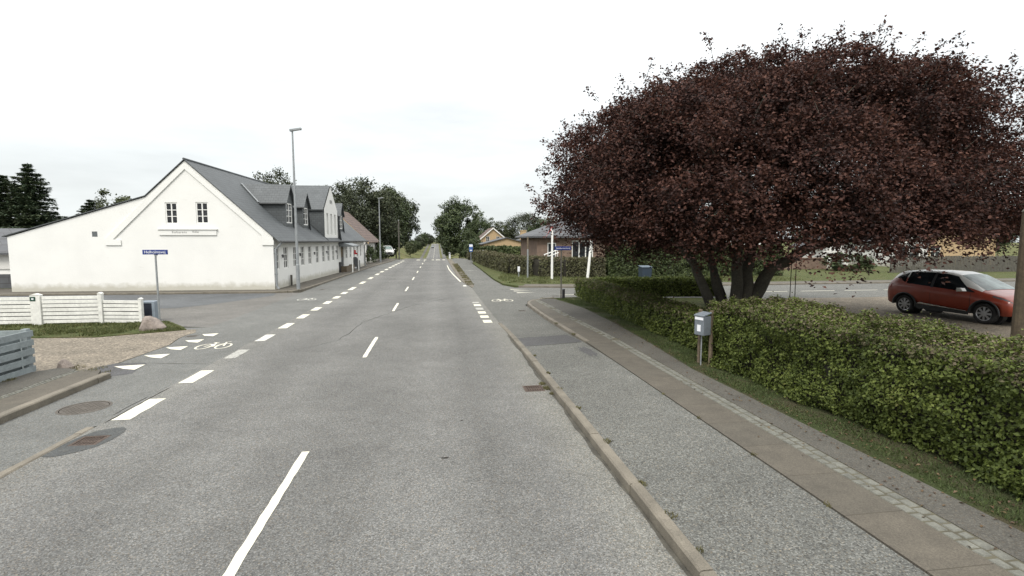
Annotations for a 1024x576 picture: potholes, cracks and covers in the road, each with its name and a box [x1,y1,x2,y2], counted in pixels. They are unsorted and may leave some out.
drain grate [68,435,111,446]
manhole cover [55,401,113,415]
